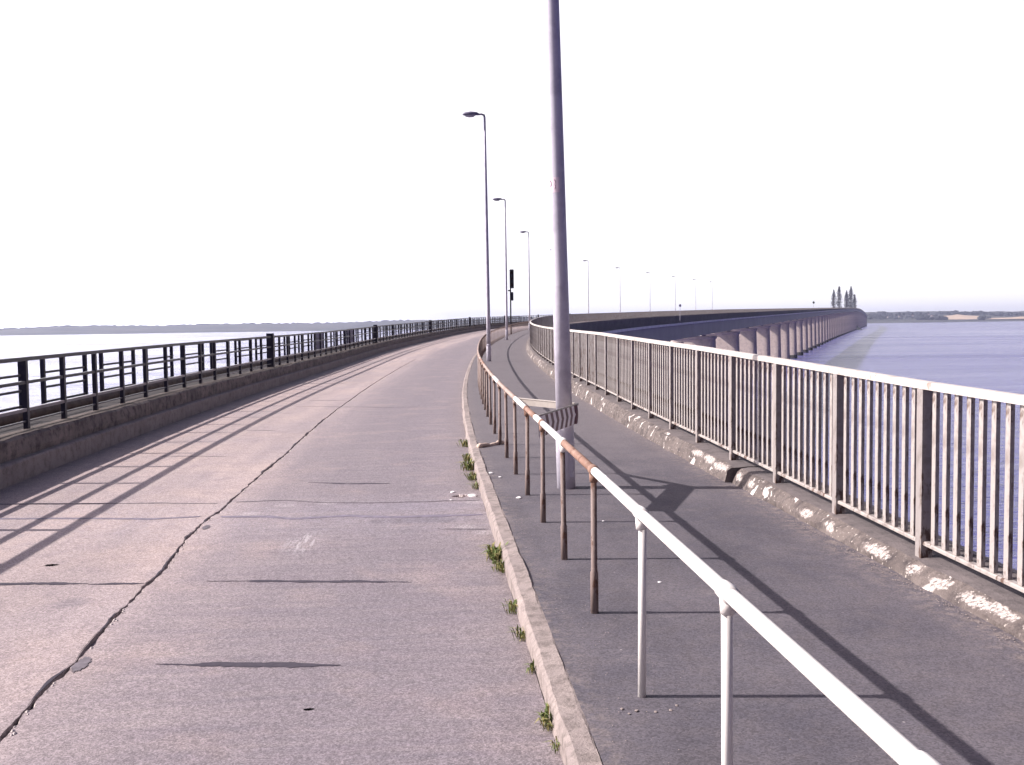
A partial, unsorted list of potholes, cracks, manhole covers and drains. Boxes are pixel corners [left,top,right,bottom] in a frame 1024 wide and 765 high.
crack [0,359,479,742]
